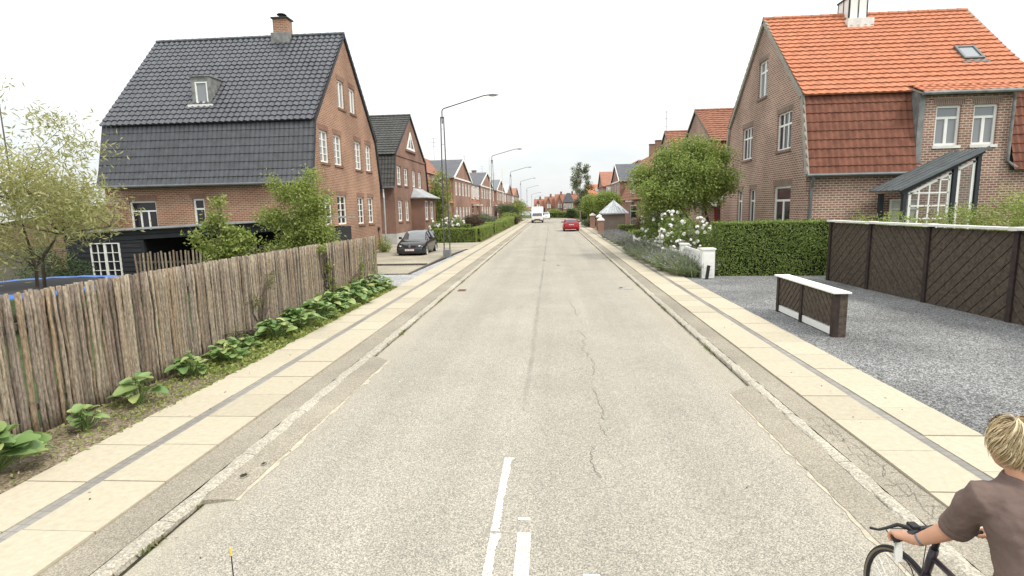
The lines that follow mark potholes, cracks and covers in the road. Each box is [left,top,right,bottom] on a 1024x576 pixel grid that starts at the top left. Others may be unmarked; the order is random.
crack [821,420,943,519]
crack [571,304,607,477]
